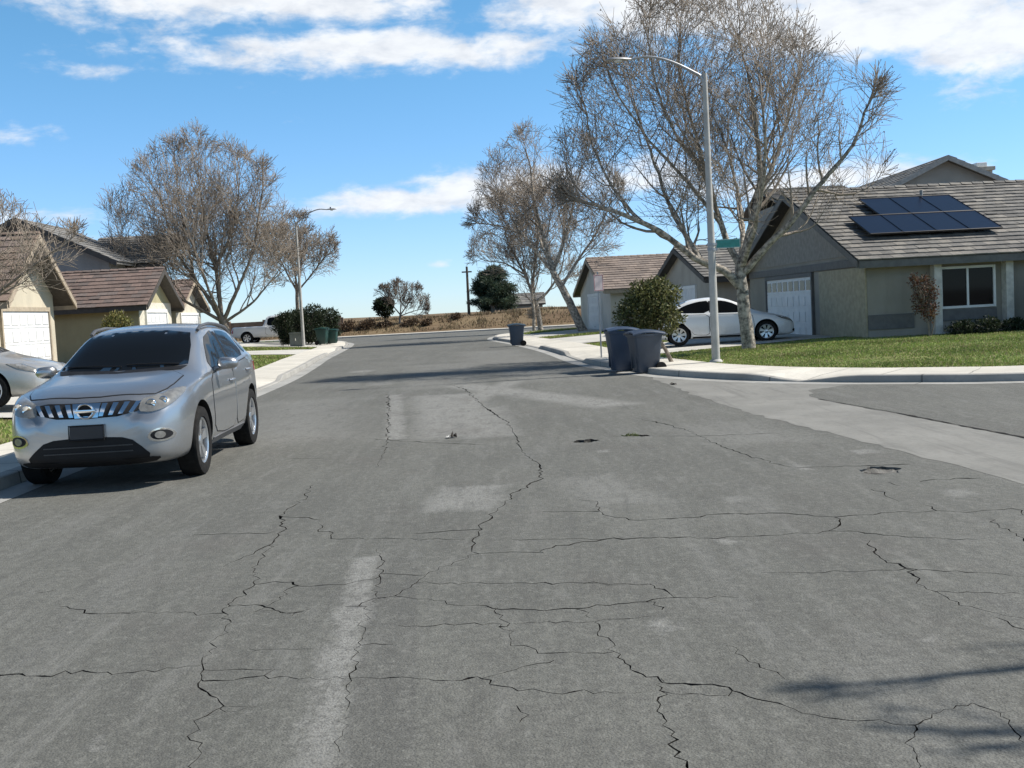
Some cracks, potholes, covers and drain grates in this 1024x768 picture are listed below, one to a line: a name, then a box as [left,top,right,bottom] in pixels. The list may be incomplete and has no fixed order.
pothole [860,466,902,475]
crack [0,455,1023,768]
crack [646,420,902,498]
